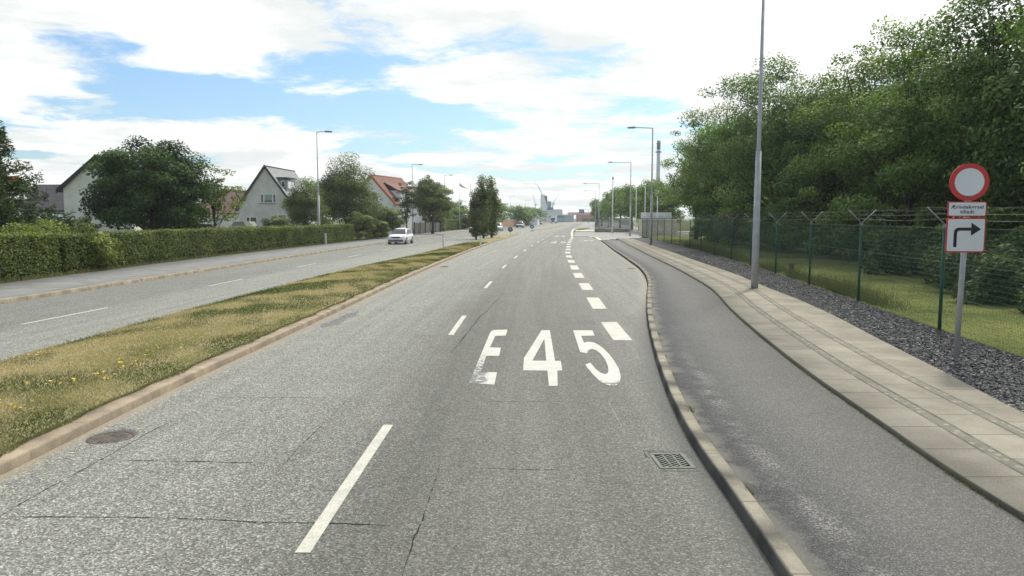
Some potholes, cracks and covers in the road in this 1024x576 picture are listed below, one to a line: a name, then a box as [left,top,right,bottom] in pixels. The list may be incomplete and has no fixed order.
drain grate [643,450,702,471]
crack [402,471,438,575]
crack [226,397,344,471]
